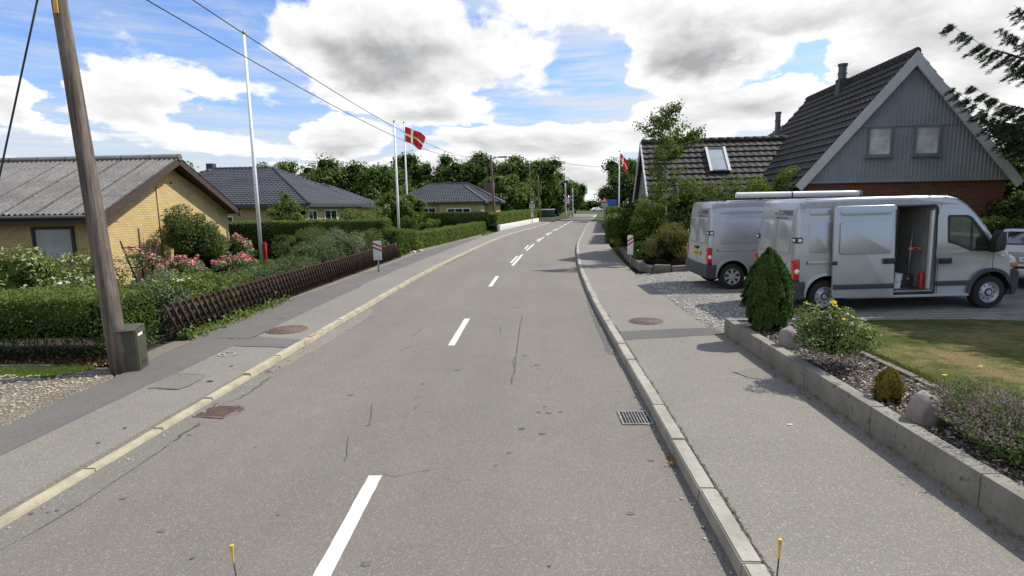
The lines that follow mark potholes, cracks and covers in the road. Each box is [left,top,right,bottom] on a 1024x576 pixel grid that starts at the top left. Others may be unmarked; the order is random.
manhole cover [628,317,664,325]
drain grate [192,405,244,419]
manhole cover [266,325,309,334]
drain grate [617,411,654,425]
crack [500,307,523,384]
